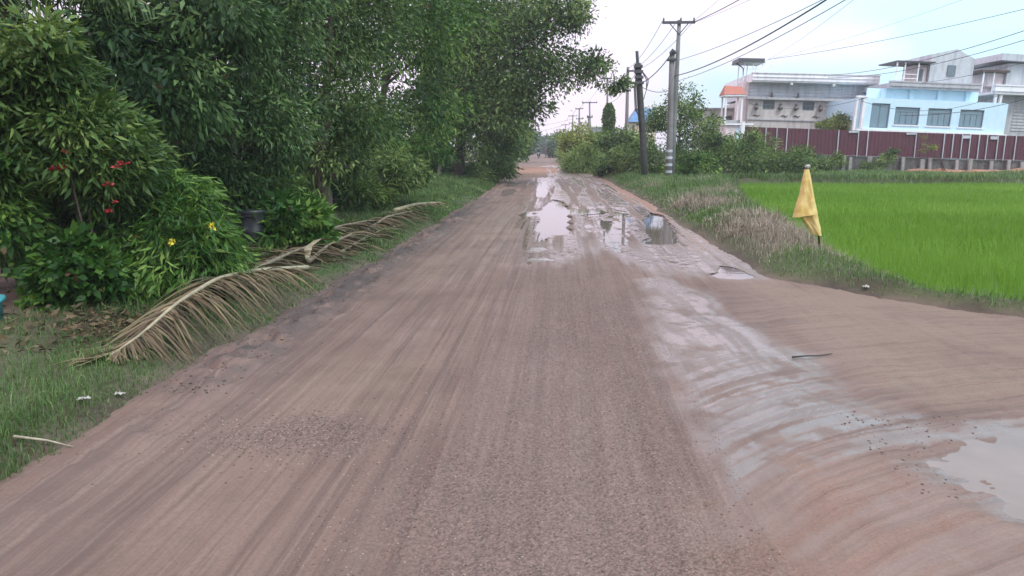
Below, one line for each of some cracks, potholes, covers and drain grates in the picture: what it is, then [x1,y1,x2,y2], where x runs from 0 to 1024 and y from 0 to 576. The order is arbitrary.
pothole [532,199,574,242]
pothole [707,266,756,280]
pothole [642,212,679,245]
